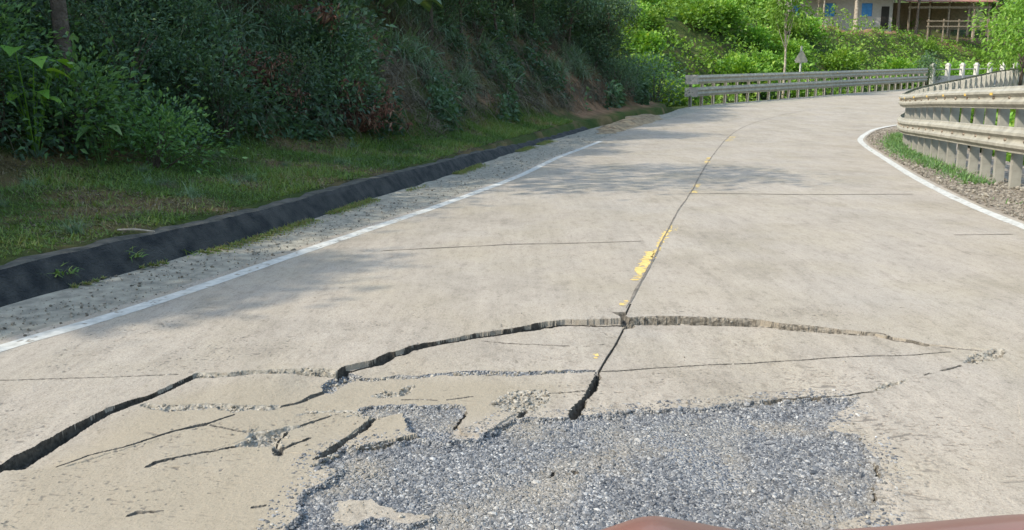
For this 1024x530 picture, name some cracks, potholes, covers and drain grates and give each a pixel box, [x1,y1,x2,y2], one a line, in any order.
crack [0,316,979,473]
pothole [256,388,912,530]
